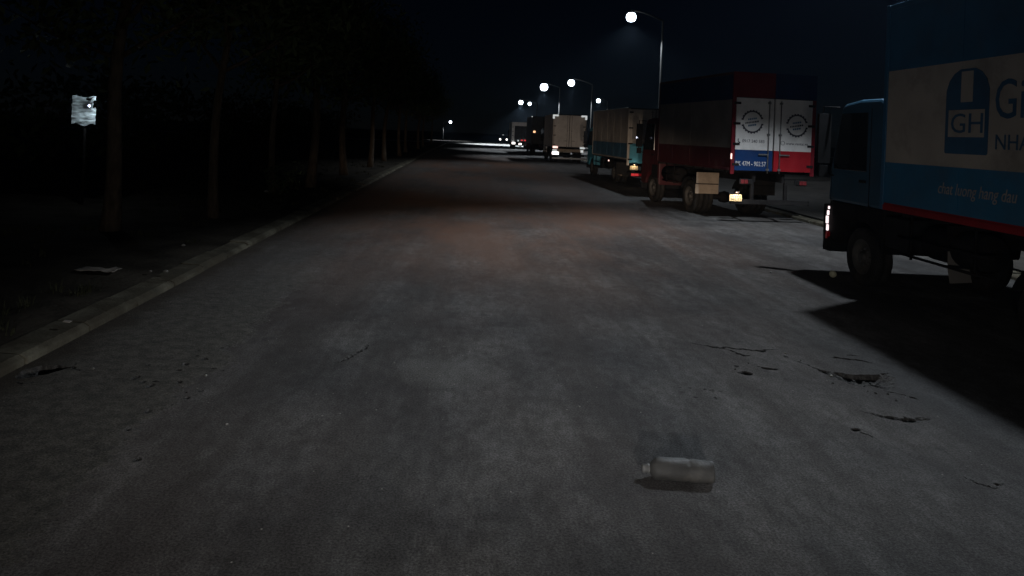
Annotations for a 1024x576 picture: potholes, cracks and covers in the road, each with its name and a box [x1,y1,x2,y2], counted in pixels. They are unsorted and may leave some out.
crack [829,355,871,363]
pothole [793,360,898,401]
crack [334,344,369,363]
crack [686,341,802,361]
crack [963,476,1005,490]
